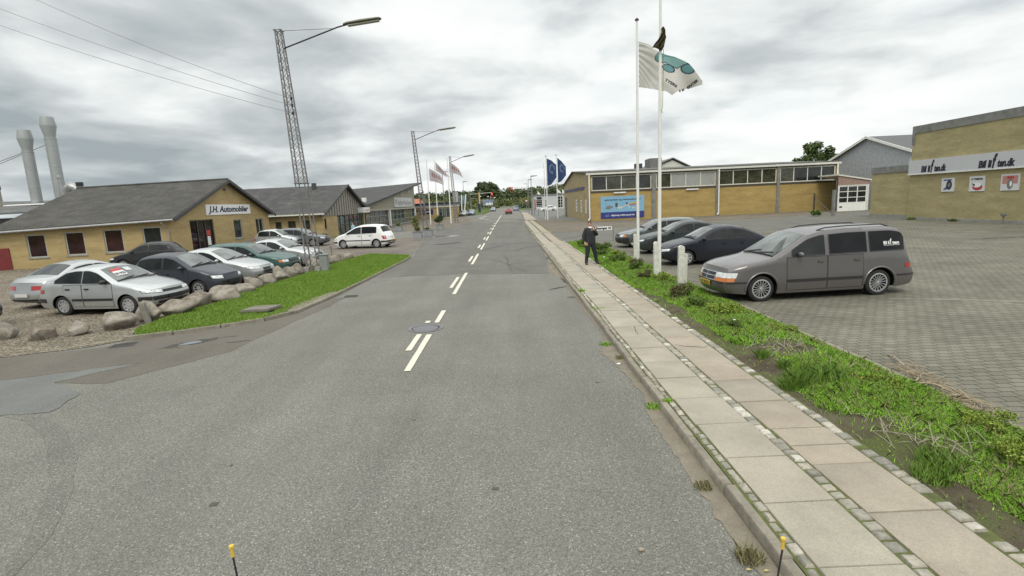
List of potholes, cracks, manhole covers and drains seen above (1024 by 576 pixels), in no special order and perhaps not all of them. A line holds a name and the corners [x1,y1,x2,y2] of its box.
manhole cover [408,324,443,333]
